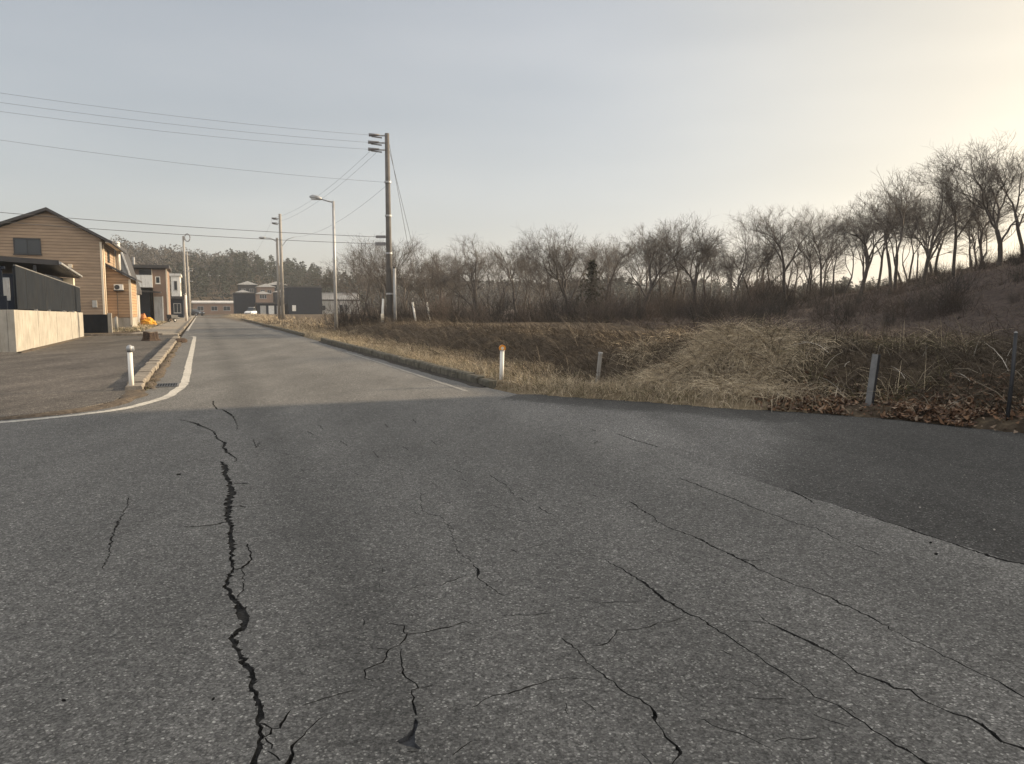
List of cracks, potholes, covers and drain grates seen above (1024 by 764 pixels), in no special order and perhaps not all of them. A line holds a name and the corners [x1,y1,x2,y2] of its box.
crack [102,497,129,569]
crack [472,501,1024,764]
crack [680,478,879,555]
crack [182,401,477,764]
crack [283,419,633,714]
